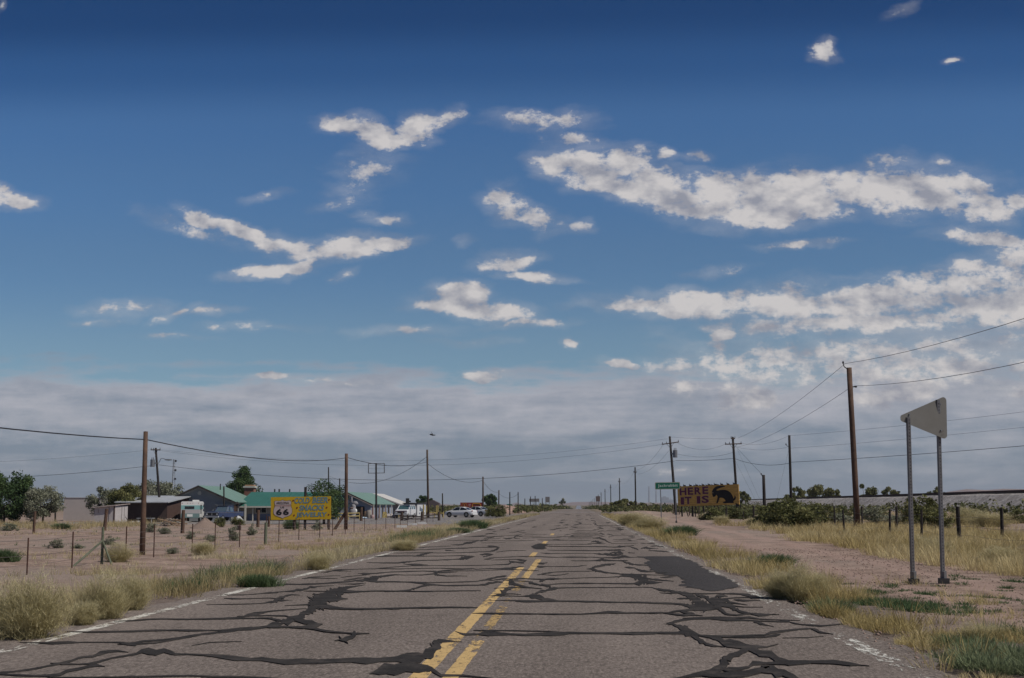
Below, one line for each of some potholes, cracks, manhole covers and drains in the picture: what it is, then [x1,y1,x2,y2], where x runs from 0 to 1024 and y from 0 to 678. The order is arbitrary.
crack [20,584,481,646]
